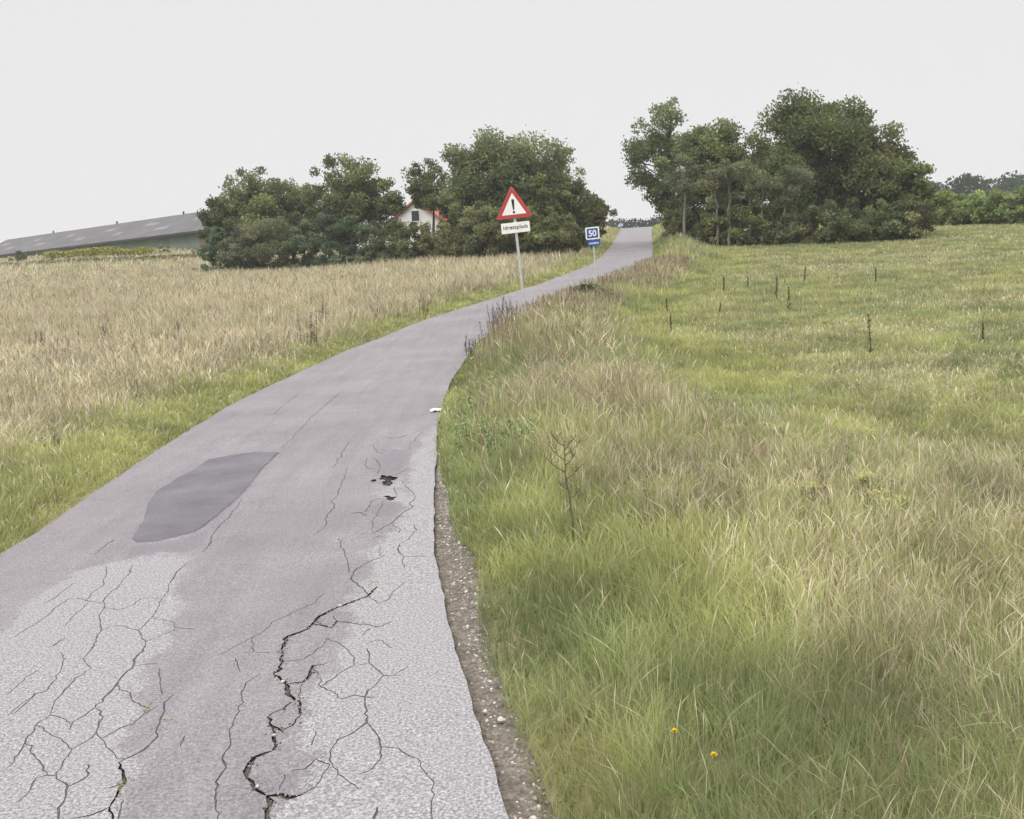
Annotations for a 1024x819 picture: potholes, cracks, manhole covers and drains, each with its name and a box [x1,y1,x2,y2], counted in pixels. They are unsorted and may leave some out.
crack [214,429,435,819]
crack [8,564,186,819]
pothole [380,475,397,486]
